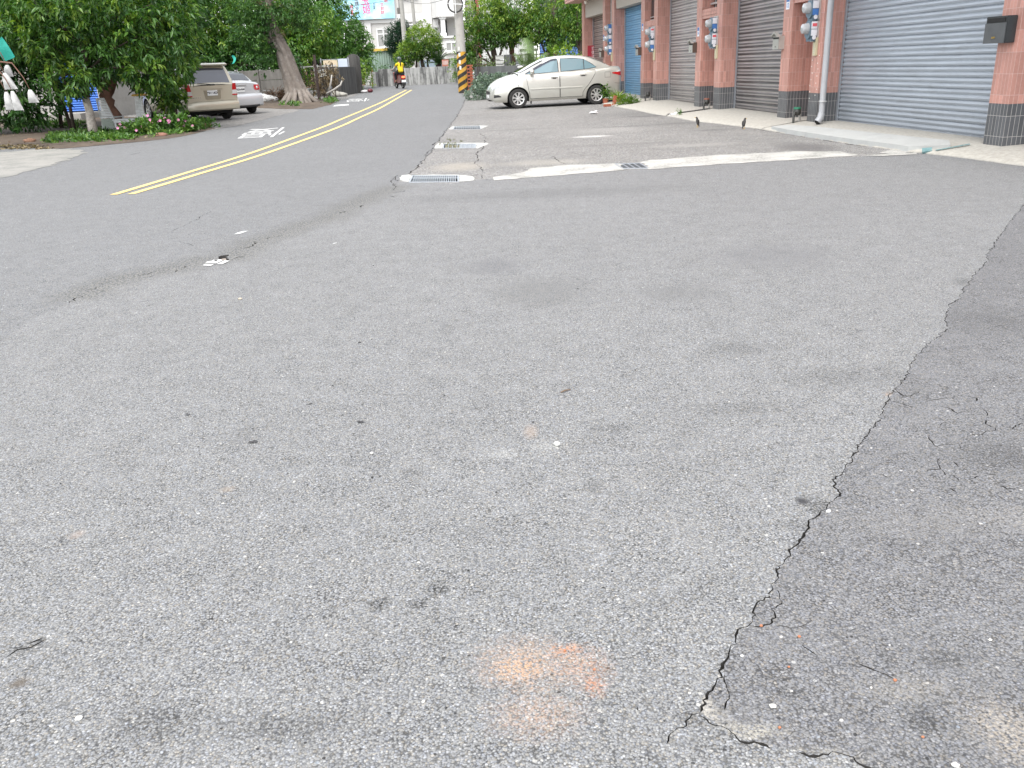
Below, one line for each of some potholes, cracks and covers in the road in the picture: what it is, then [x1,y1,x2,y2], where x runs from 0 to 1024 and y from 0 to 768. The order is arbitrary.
drain grate [409,175,459,183]
crack [667,205,1024,768]
crack [390,105,463,197]
